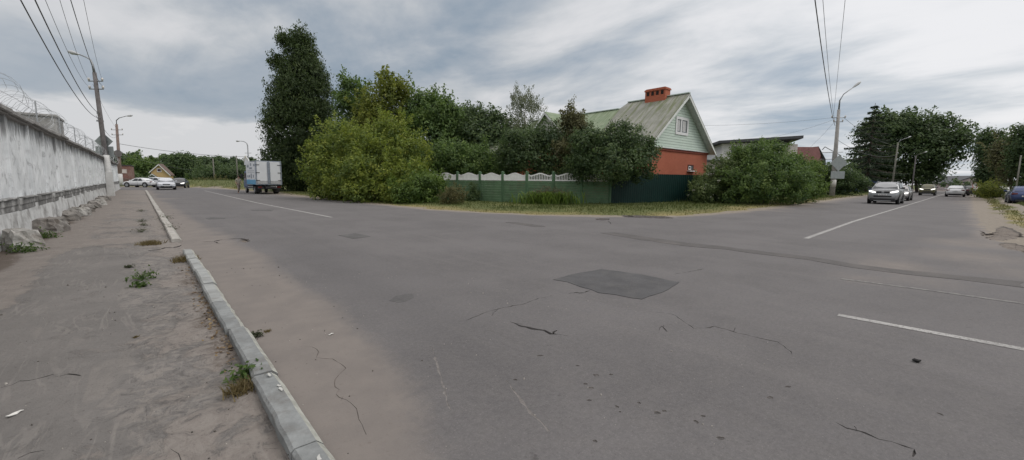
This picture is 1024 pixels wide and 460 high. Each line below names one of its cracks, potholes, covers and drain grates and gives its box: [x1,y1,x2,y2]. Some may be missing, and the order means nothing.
crack [660,312,792,354]
crack [836,422,916,457]
pothole [999,243,1024,252]
crack [313,347,366,434]
crack [468,297,567,336]
pothole [981,226,1023,241]
